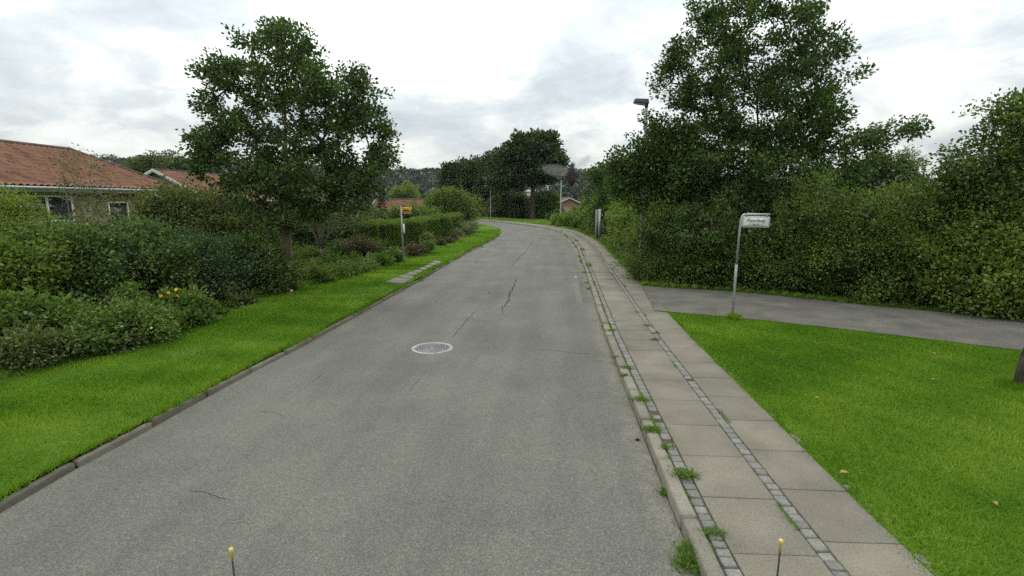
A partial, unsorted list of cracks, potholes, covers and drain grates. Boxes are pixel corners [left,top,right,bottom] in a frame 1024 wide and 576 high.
manhole cover [411,342,453,354]
